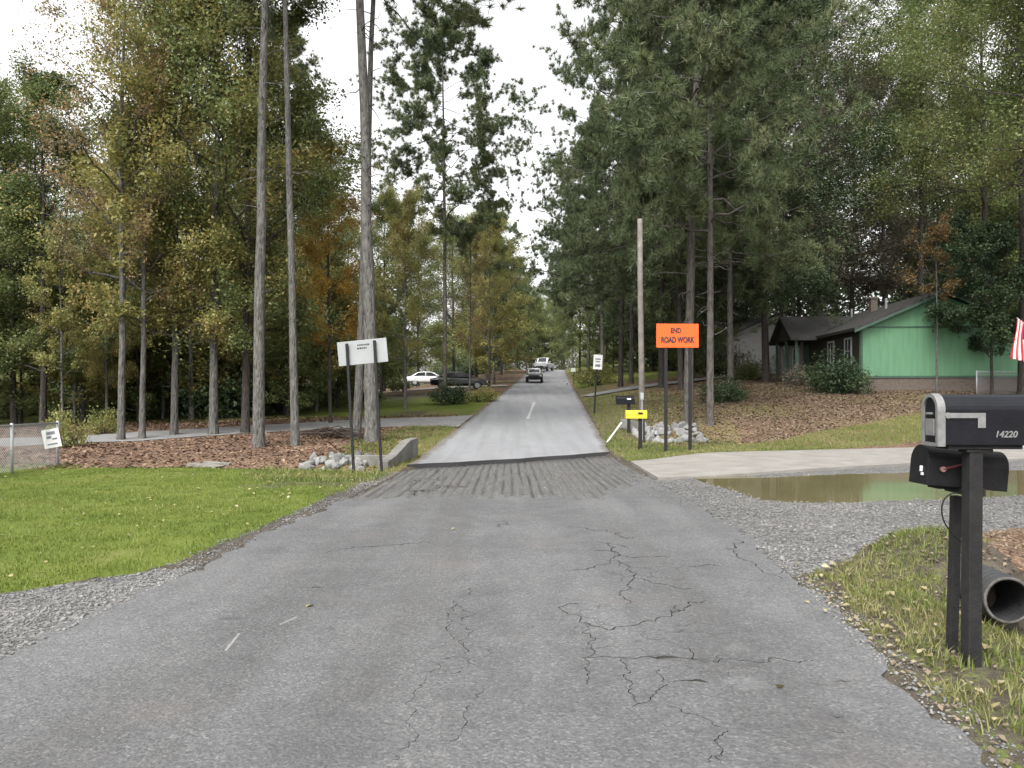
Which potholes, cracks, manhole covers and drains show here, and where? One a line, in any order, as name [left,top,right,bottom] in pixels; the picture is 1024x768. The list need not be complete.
crack [394,584,491,760]
crack [558,526,812,706]
